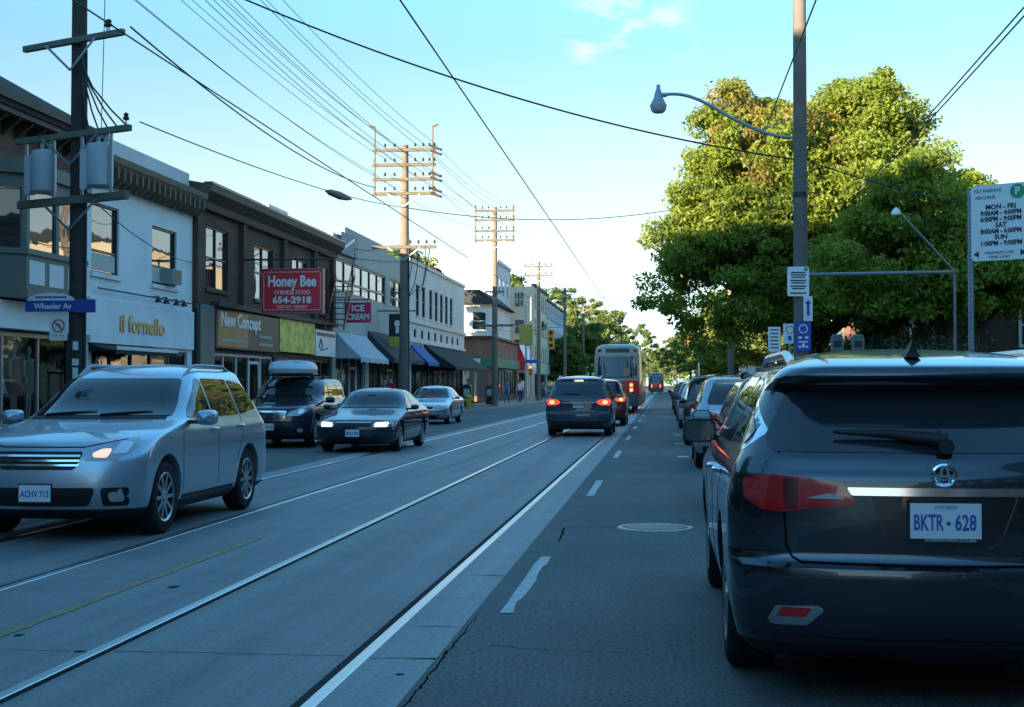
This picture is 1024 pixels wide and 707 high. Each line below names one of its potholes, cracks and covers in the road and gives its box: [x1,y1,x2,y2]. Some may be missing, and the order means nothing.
manhole cover [617,523,694,532]
